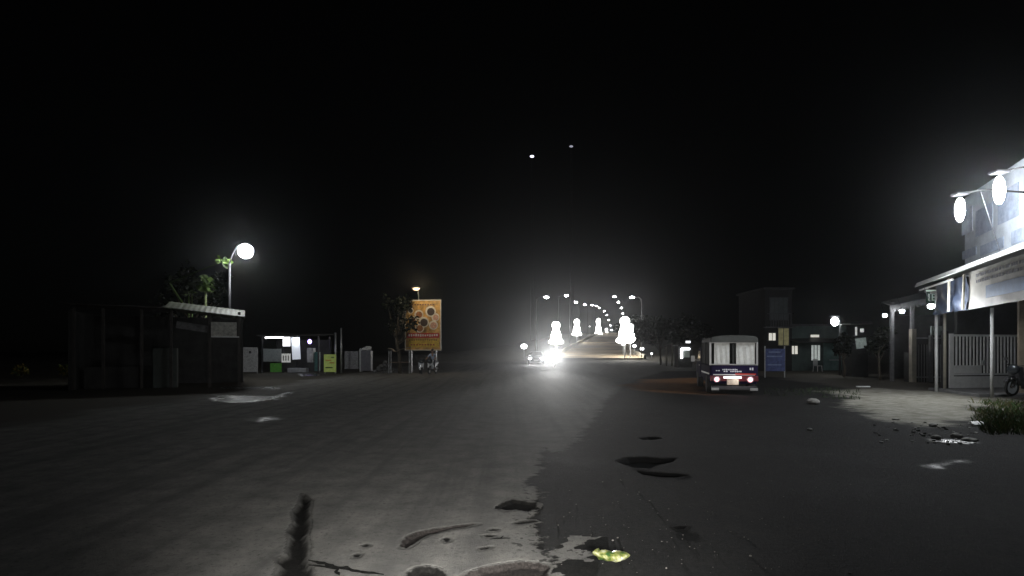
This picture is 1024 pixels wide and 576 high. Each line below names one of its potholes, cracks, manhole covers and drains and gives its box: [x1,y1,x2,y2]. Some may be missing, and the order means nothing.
pothole [615,456,678,469]
pothole [495,497,543,512]
pothole [634,470,692,478]
pothole [403,565,449,576]
crack [308,560,384,575]
pothole [459,560,554,576]
